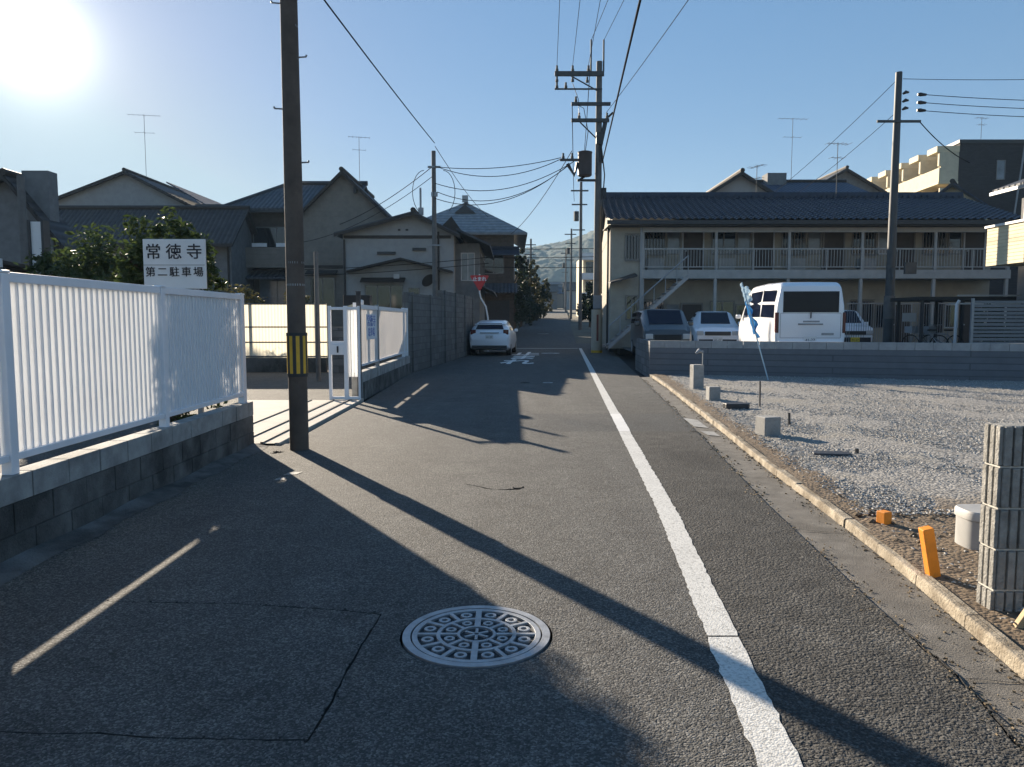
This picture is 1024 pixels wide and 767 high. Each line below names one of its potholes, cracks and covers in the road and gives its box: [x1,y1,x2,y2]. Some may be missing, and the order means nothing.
manhole cover [402,605,550,669]
